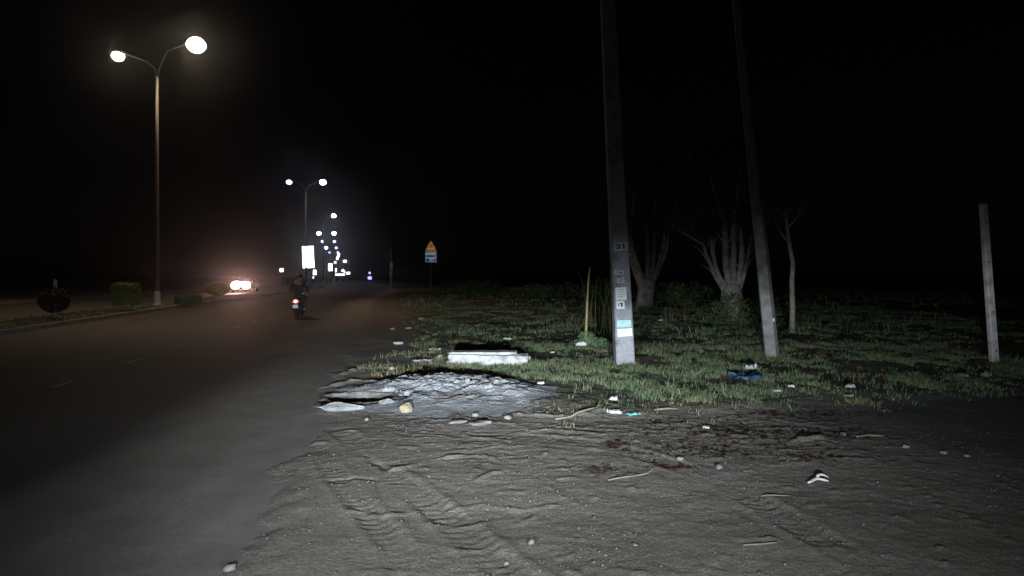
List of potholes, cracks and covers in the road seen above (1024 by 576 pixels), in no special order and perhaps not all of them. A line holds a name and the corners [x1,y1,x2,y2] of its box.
pothole [317,391,407,406]
